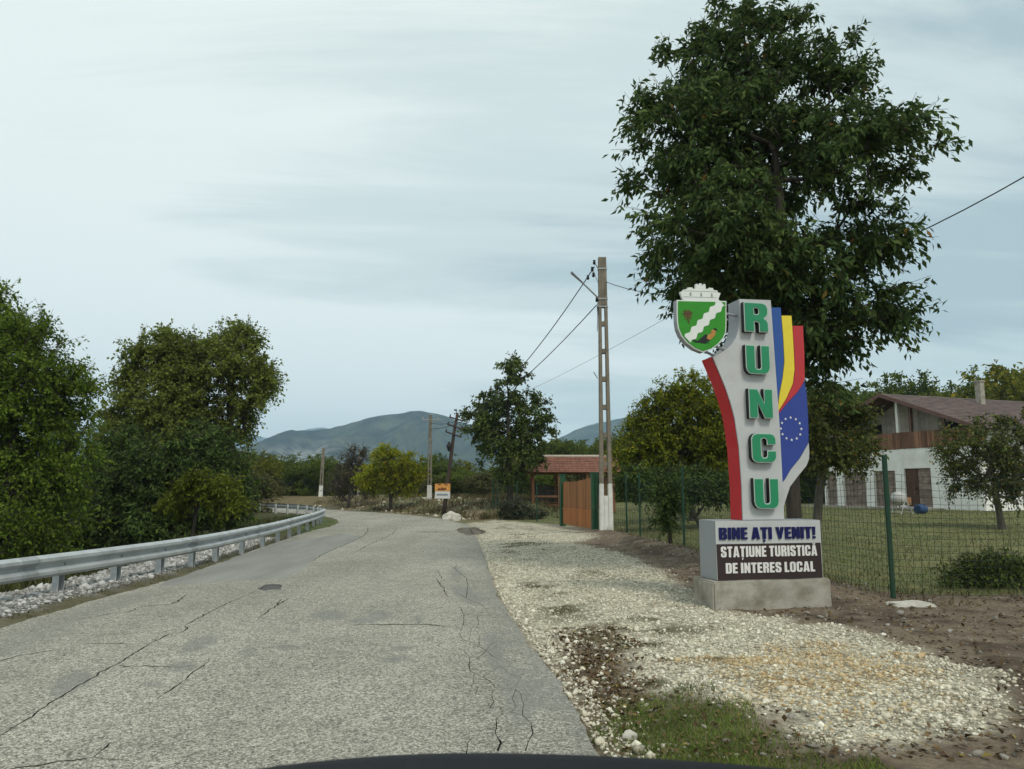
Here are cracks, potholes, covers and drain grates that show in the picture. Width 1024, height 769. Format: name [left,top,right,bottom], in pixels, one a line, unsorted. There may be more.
crack [10,742,130,769]
crack [1,593,251,735]
crack [354,565,533,753]
